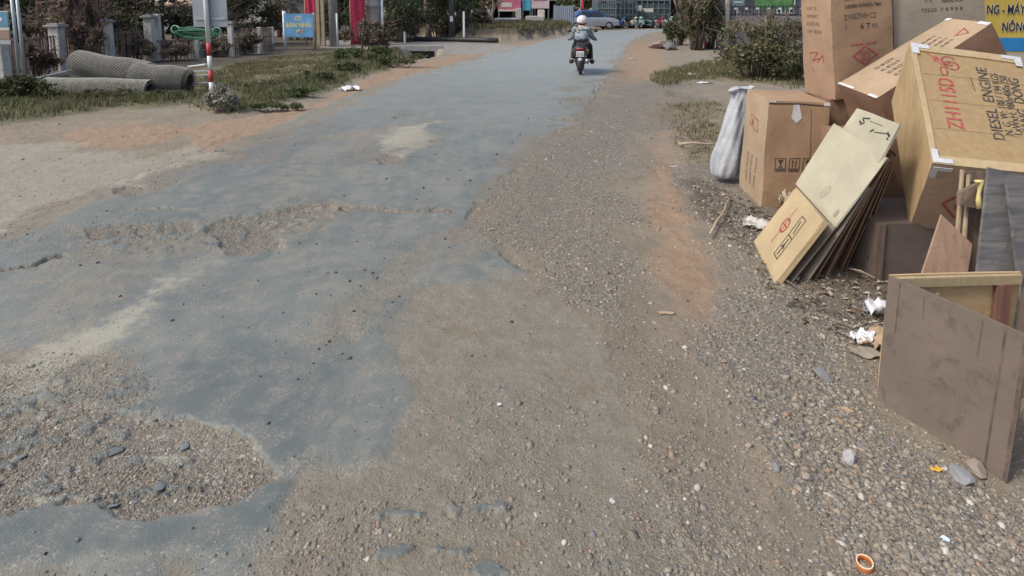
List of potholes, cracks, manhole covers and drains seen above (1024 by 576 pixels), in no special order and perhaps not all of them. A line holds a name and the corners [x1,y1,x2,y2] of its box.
pothole [206,204,337,257]
pothole [113,186,147,197]
crack [0,253,67,272]
crack [339,206,458,214]
pothole [0,399,280,522]
pothole [86,221,195,240]
